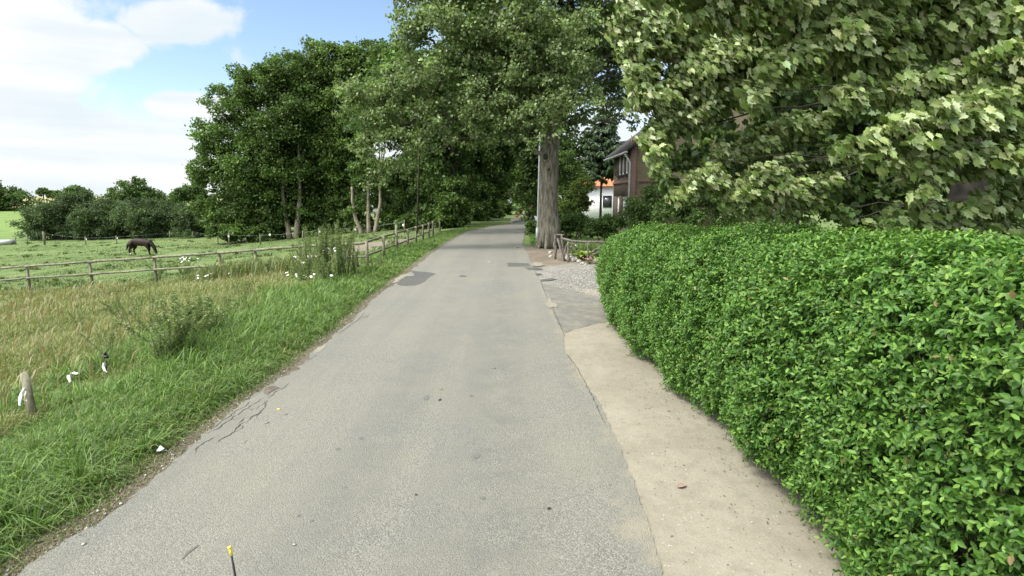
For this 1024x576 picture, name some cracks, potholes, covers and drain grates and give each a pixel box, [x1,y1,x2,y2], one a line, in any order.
crack [195,386,286,453]
